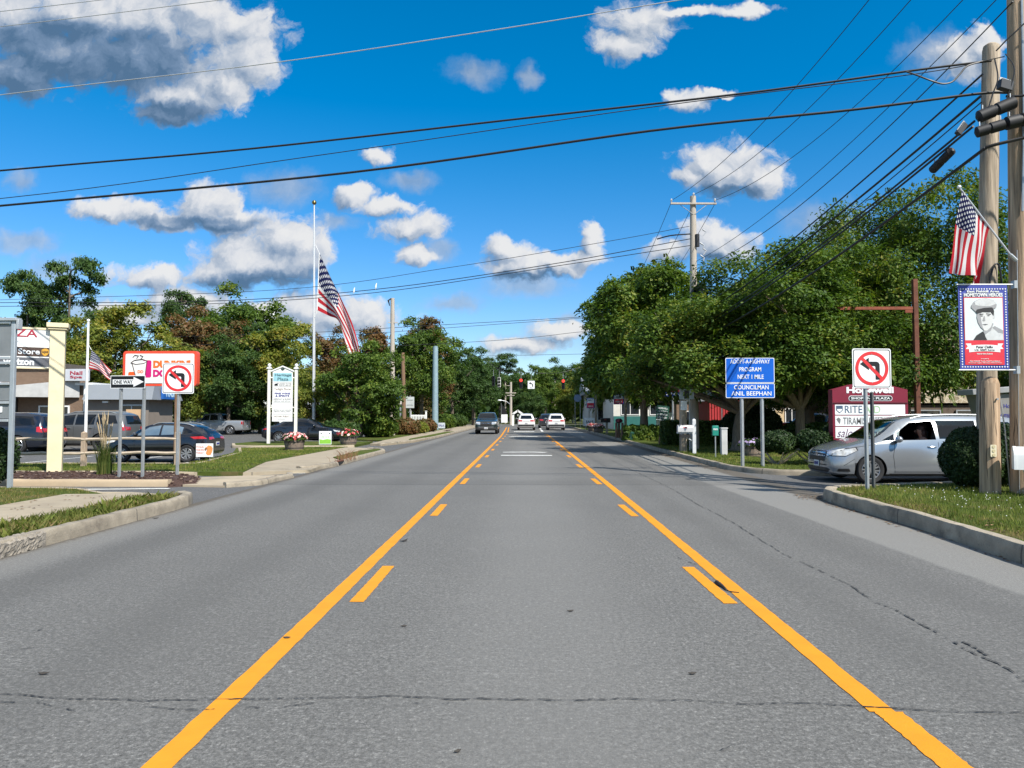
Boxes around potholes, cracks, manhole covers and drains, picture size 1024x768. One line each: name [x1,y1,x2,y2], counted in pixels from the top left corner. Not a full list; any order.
crack [0,693,1004,712]
